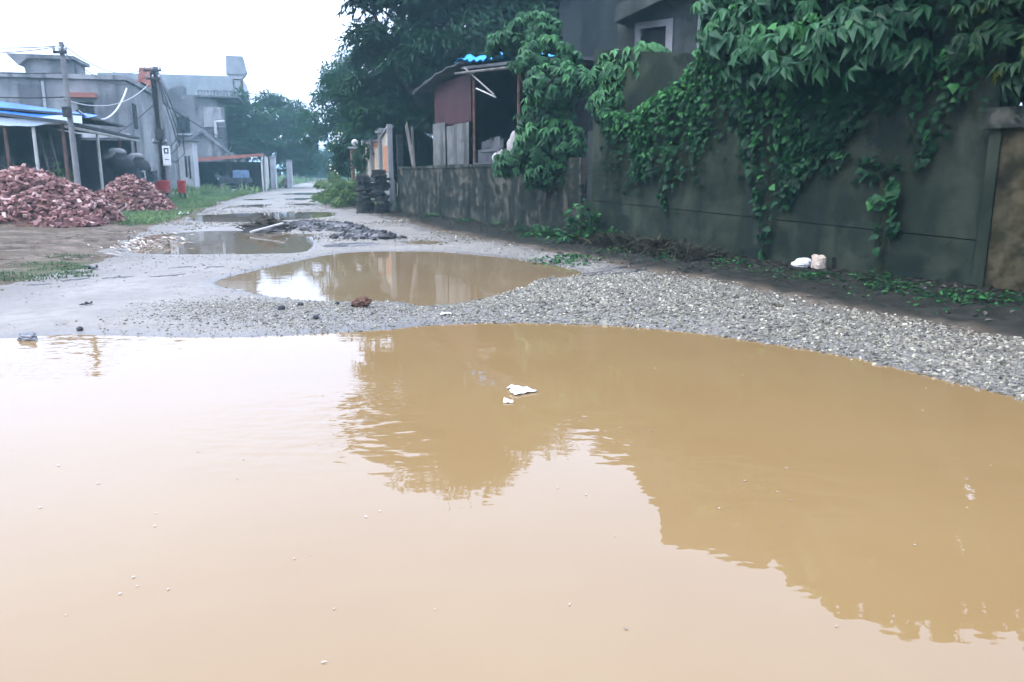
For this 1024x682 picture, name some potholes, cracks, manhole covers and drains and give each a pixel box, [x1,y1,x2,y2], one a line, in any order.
pothole [129,231,325,254]
pothole [0,323,1024,682]
pothole [189,212,338,222]
pothole [214,251,582,306]
